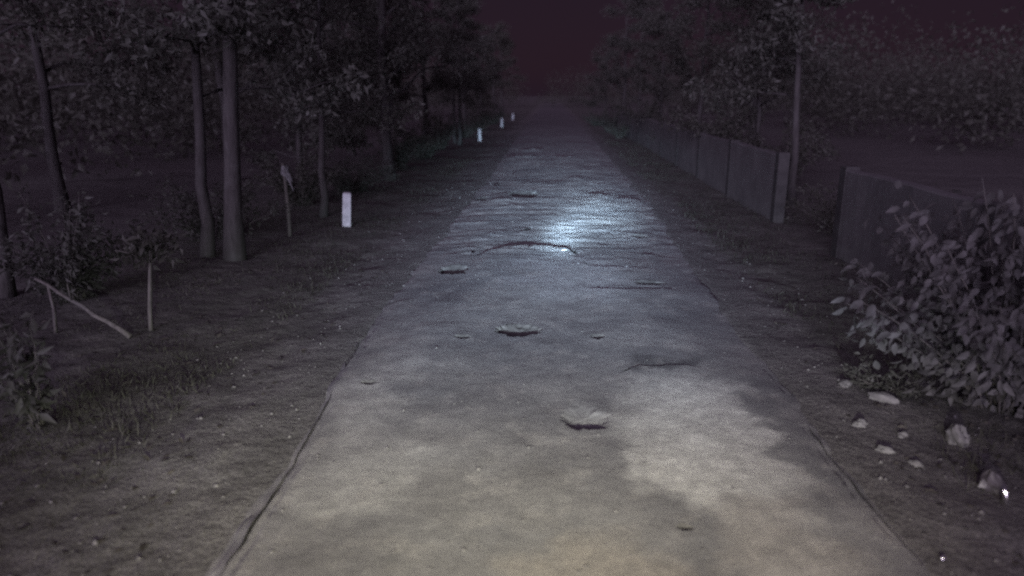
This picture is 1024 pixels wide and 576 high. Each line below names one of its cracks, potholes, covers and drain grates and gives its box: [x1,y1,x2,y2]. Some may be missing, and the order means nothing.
crack [559,176,646,202]
pothole [485,321,552,341]
pothole [445,331,482,343]
crack [612,360,706,377]
crack [454,226,686,293]
pothole [543,396,627,438]
pothole [499,189,549,198]
pothole [430,262,477,277]
